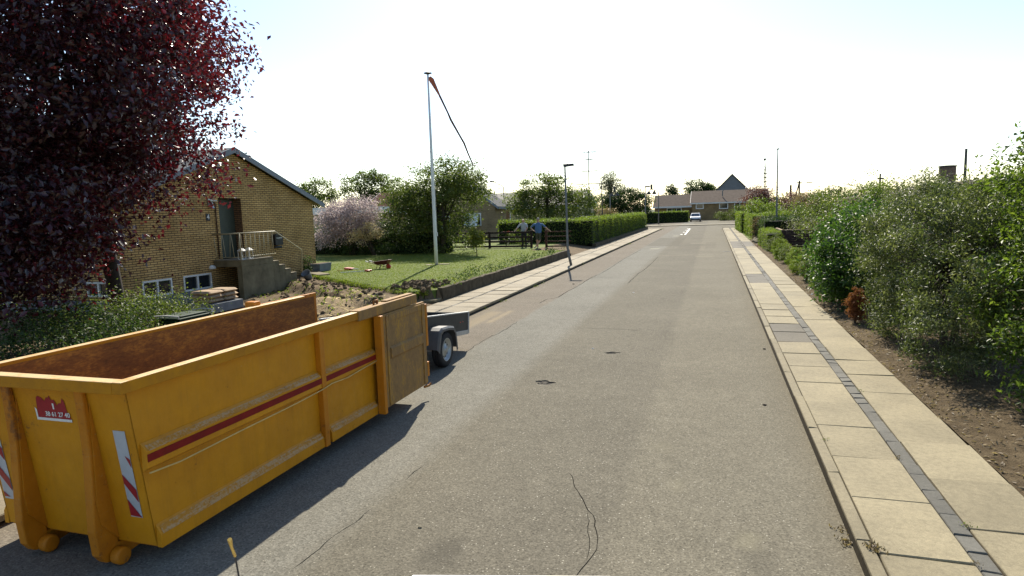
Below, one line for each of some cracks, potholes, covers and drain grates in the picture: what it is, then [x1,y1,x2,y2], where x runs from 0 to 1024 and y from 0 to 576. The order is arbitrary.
crack [294,511,368,568]
crack [561,473,598,576]
